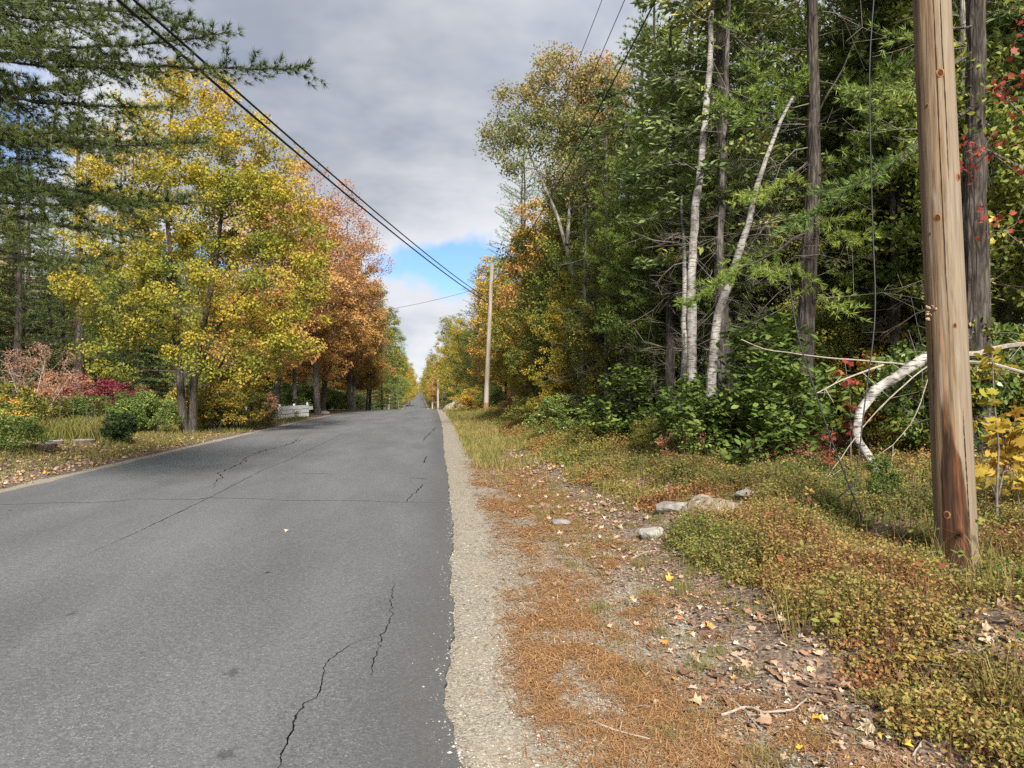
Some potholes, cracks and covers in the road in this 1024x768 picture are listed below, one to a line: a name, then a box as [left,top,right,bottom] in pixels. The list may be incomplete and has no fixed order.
crack [278,583,395,768]
crack [2,438,426,505]
